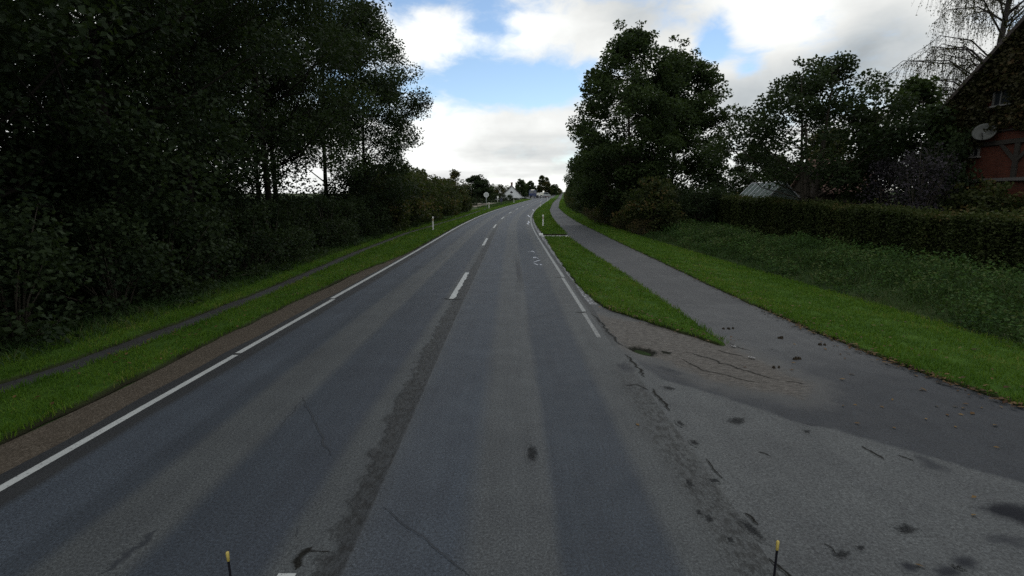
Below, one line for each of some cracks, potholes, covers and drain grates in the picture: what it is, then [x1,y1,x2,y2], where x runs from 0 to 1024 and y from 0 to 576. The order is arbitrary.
pothole [825,547,855,563]
pothole [524,442,541,467]
crack [102,529,158,574]
crack [861,446,913,461]
pothole [620,344,661,357]
crack [281,397,331,455]
crack [384,507,469,575]
crack [576,312,803,410]
crack [745,512,758,525]
pothole [889,520,924,537]
